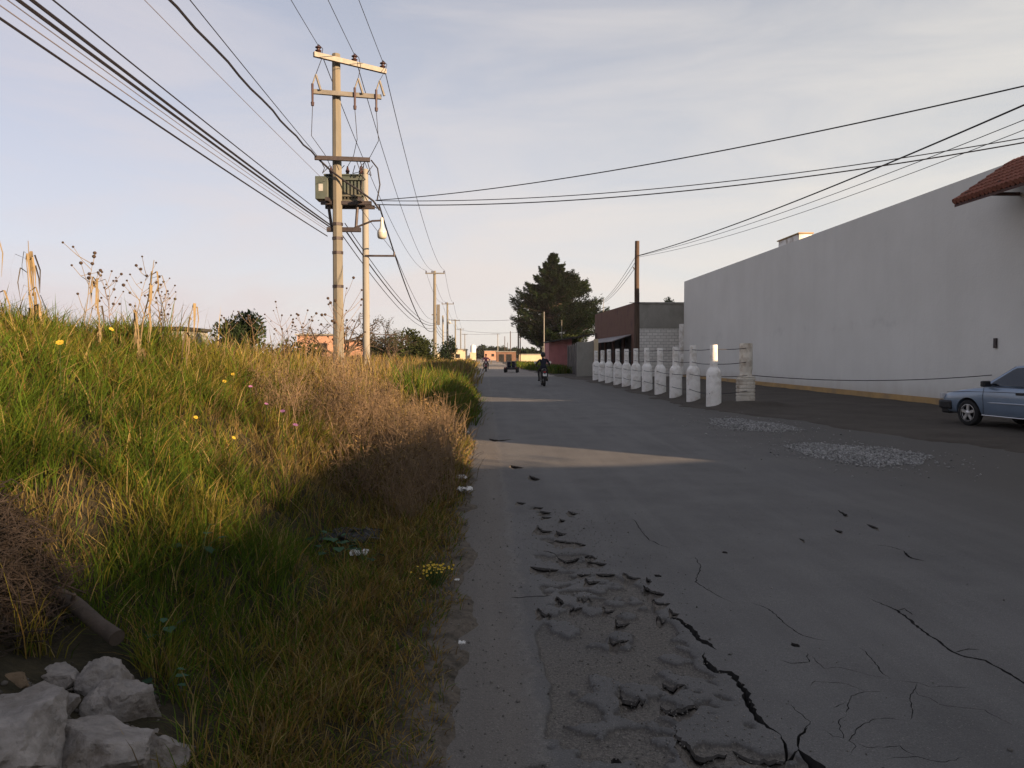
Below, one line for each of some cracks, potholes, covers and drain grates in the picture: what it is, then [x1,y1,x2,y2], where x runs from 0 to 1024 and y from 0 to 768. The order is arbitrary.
pothole [608,637,629,655]
pothole [547,540,586,549]
pothole [643,585,664,603]
pothole [535,608,551,621]
pothole [618,690,646,713]
pothole [556,558,579,567]
pothole [652,599,670,612]
pothole [660,705,698,722]
pothole [530,567,559,578]
pothole [622,573,641,588]
pothole [662,683,684,696]
